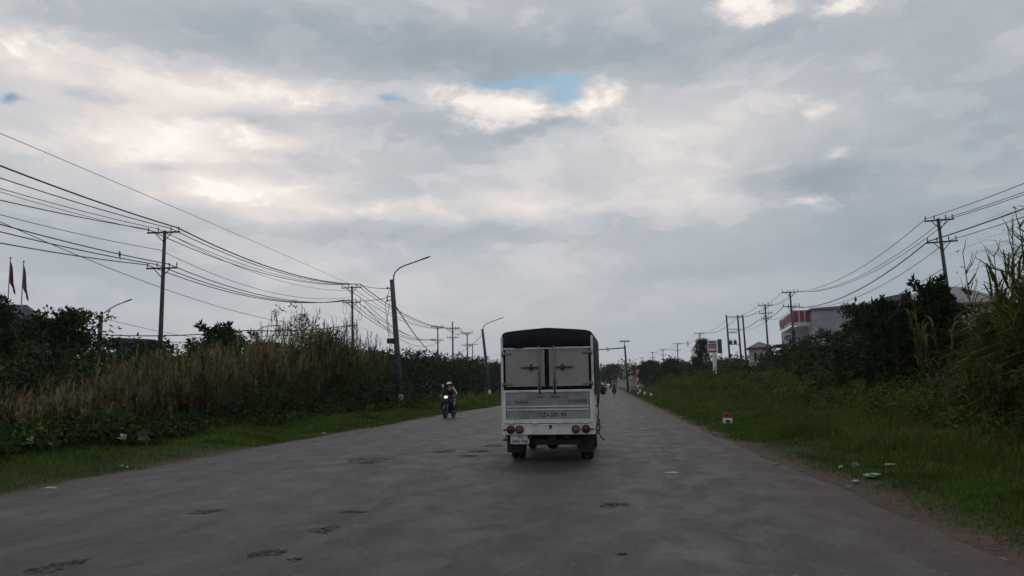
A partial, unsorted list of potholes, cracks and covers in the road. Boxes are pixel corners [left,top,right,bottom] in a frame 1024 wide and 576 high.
pothole [242,549,290,559]
pothole [19,558,92,575]
pothole [305,525,343,534]
